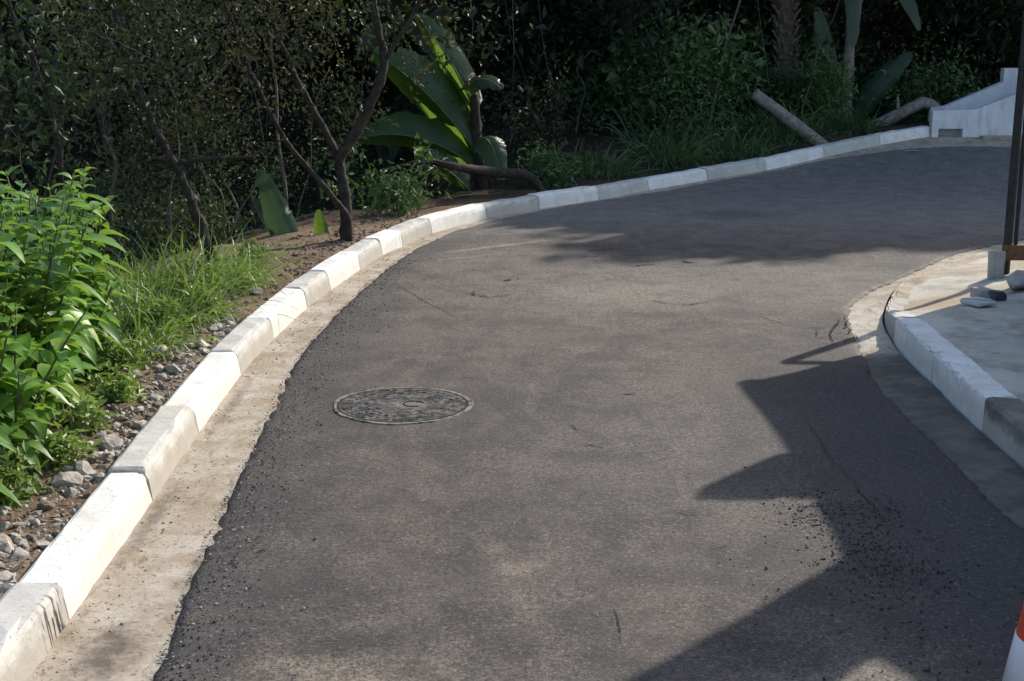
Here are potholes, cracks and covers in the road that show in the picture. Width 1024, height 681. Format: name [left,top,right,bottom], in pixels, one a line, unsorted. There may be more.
manhole cover [333,387,474,425]
crack [804,420,882,518]
crack [767,314,860,344]
